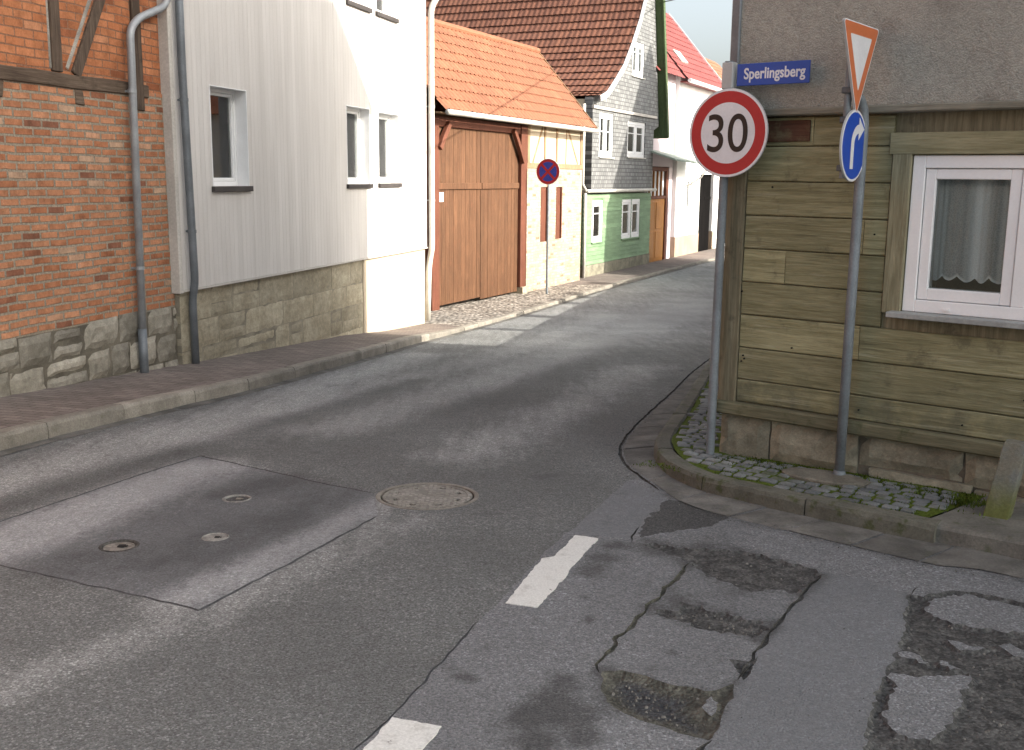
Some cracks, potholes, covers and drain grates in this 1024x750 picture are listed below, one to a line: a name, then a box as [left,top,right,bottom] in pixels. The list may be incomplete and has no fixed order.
pothole [862,590,1024,750]
pothole [729,658,757,680]
manhole cover [98,539,140,552]
manhole cover [222,494,252,502]
pothole [601,670,734,740]
pothole [653,602,772,639]
pothole [645,542,825,593]
manhole cover [201,533,229,541]
manhole cover [376,482,479,510]
